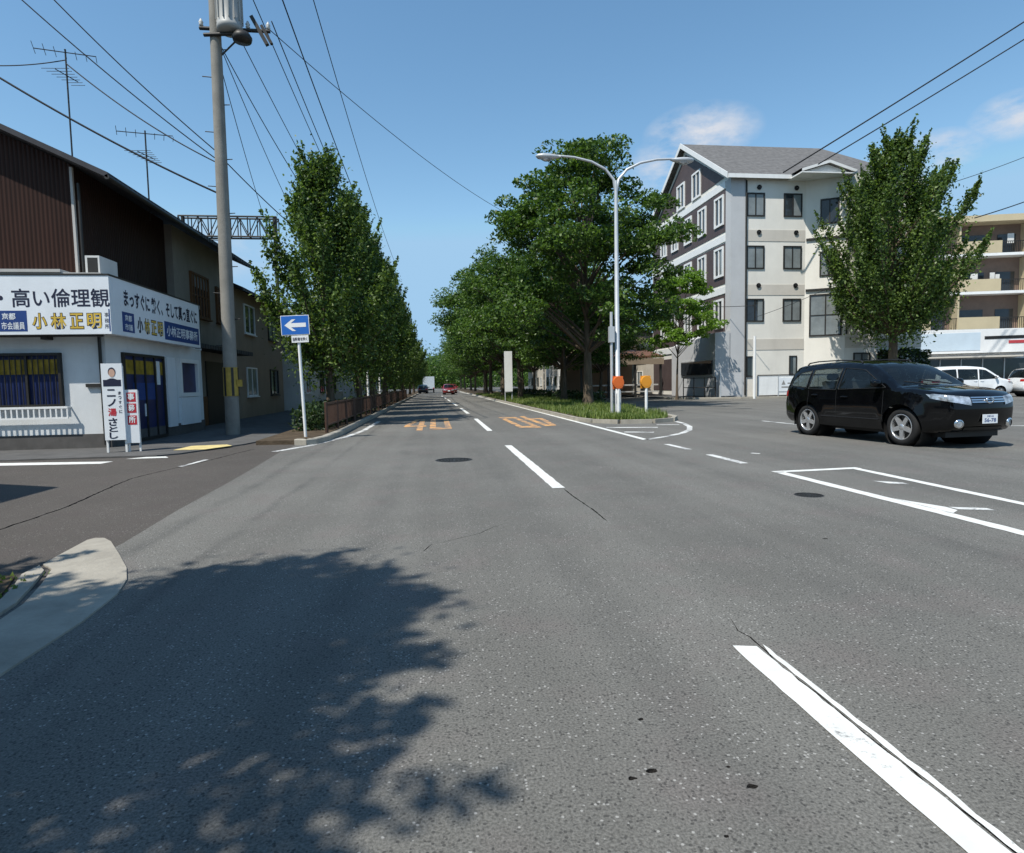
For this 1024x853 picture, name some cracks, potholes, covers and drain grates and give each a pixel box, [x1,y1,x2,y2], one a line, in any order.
crack [0,449,253,530]
